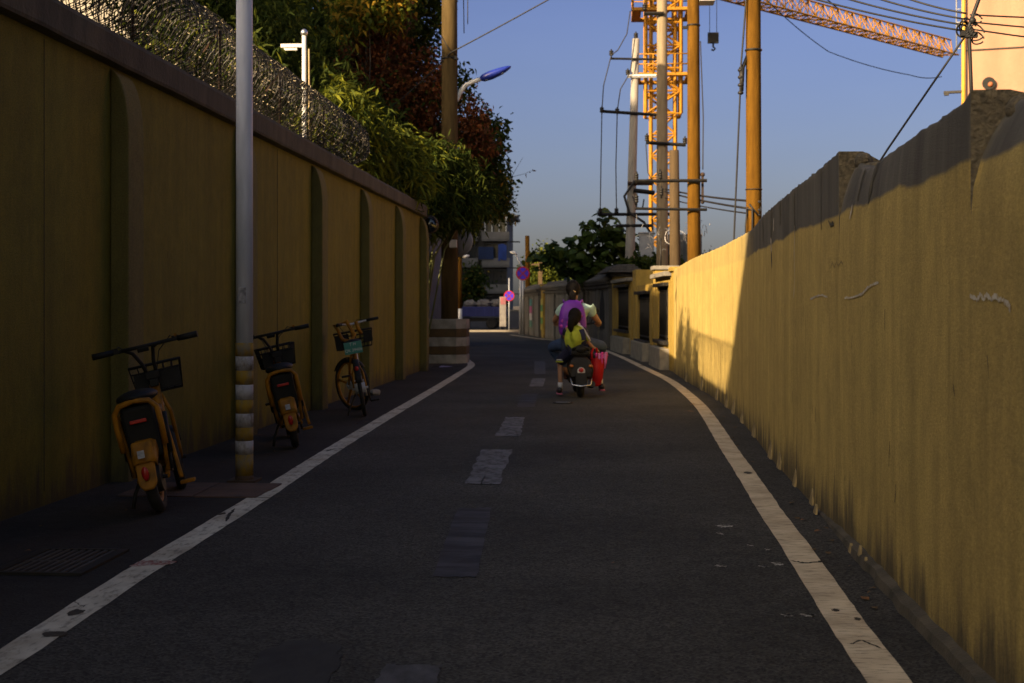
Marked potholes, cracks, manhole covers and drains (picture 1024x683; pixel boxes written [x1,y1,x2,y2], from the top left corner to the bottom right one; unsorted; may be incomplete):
drain grate [0,548,129,576]
